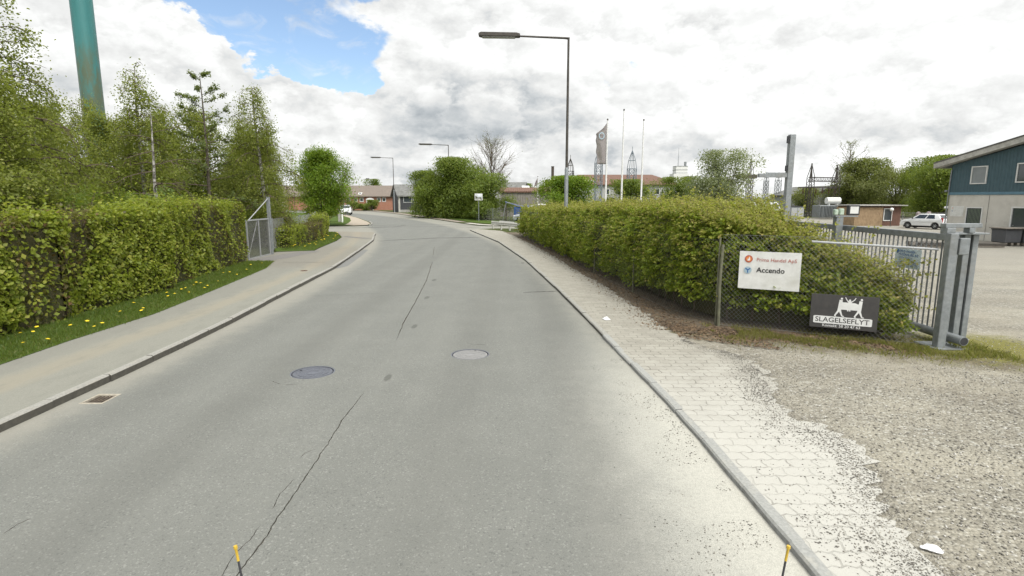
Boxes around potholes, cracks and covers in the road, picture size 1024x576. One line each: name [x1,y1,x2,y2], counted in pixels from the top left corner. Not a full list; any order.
drain grate [79,394,121,404]
manhole cover [451,349,489,360]
crack [397,247,435,338]
crack [222,391,365,576]
manhole cover [290,366,335,379]
